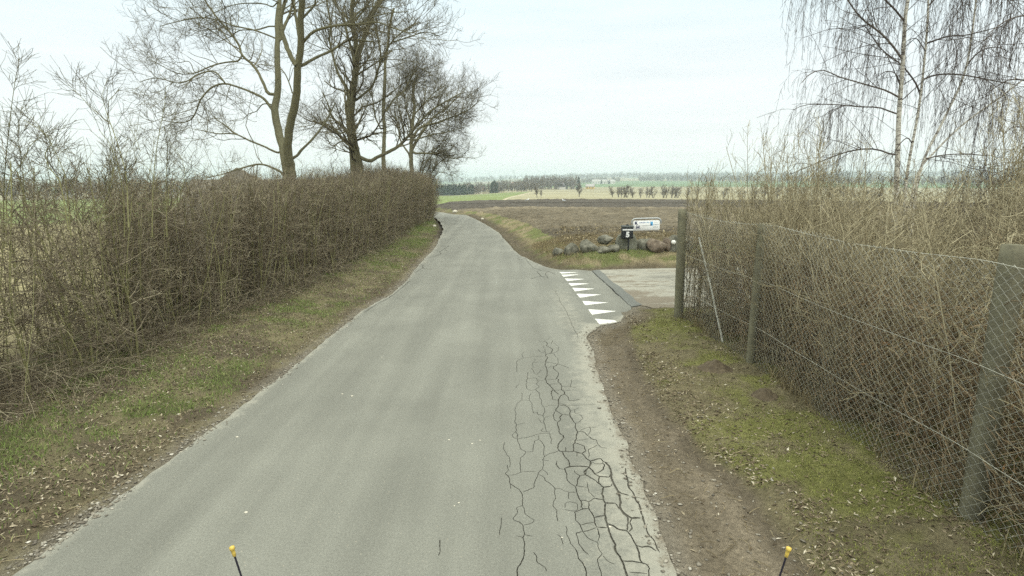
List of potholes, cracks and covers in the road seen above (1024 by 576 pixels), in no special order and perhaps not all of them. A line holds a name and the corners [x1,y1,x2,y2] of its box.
crack [499,341,660,576]
